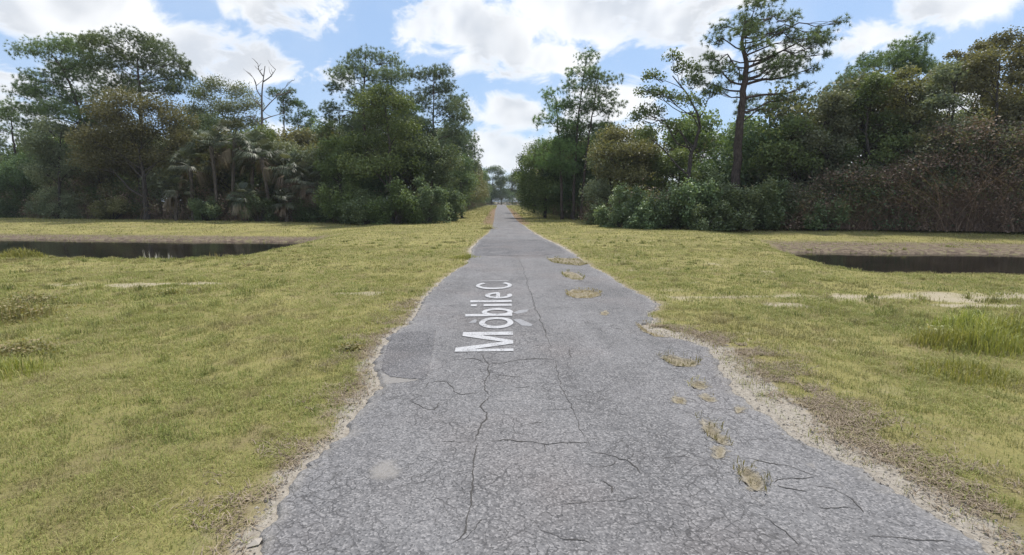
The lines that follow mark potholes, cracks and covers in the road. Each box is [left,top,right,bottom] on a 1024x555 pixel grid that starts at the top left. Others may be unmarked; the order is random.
pothole [547,256,590,266]
crack [752,458,863,511]
pothole [732,455,772,493]
pothole [710,445,730,459]
pothole [560,269,585,280]
pothole [565,287,603,298]
pothole [656,349,702,367]
pothole [687,375,713,390]
crack [413,349,640,544]
pothole [695,411,734,446]
